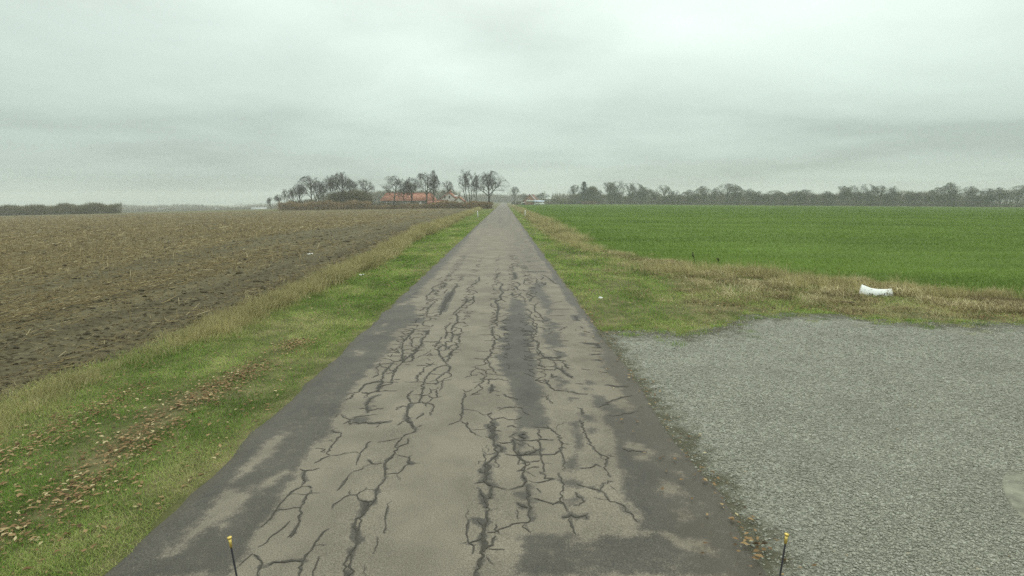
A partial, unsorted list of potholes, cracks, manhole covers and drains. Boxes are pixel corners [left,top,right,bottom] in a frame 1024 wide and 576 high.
crack [239,255,644,576]
